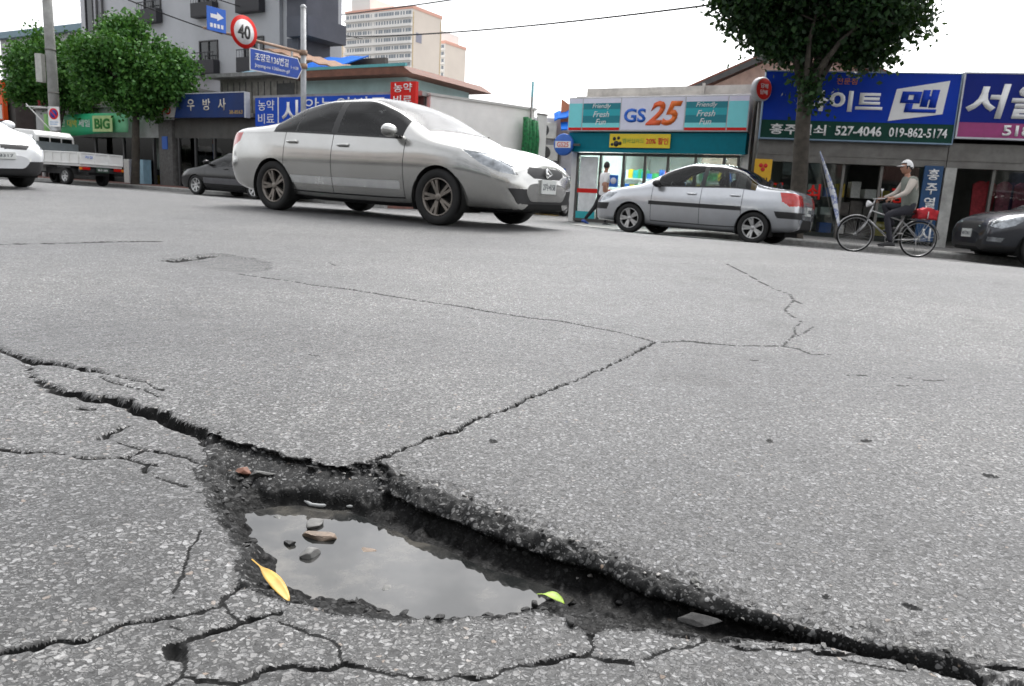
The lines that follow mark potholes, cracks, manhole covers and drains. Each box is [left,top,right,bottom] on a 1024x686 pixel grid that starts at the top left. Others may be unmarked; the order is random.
crack [971,664,1024,672]
pothole [192,428,984,686]
crack [0,349,221,488]
crack [238,264,829,466]
crack [0,529,705,686]
crack [727,645,907,672]
